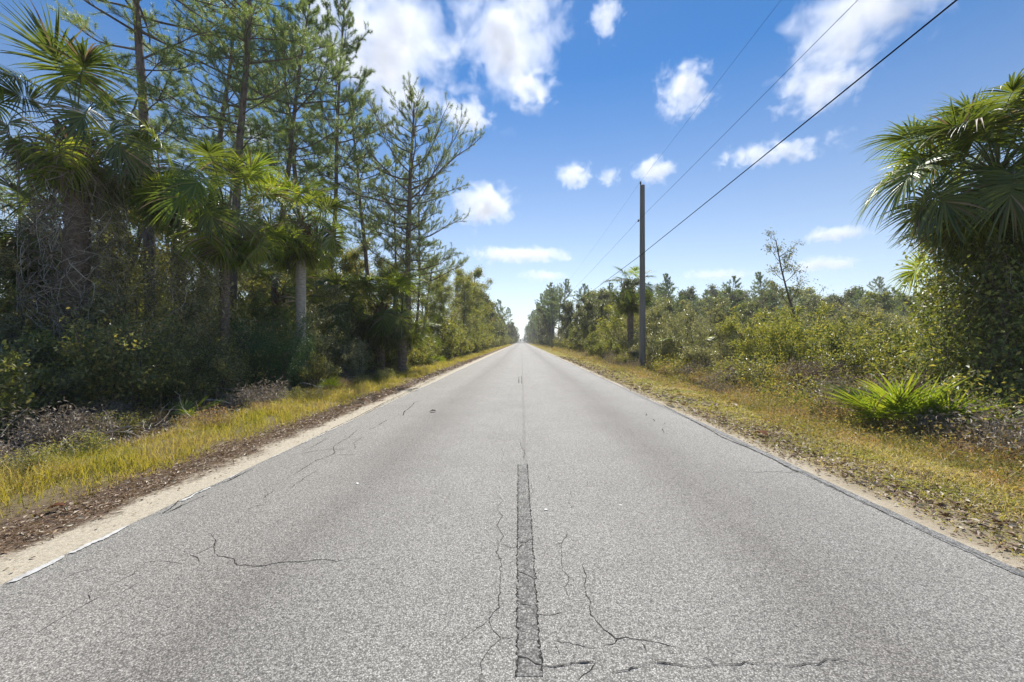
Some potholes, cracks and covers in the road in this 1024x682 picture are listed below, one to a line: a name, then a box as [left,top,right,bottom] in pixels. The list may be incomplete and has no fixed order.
crack [115,534,349,593]
crack [458,498,852,682]
crack [145,368,456,518]
